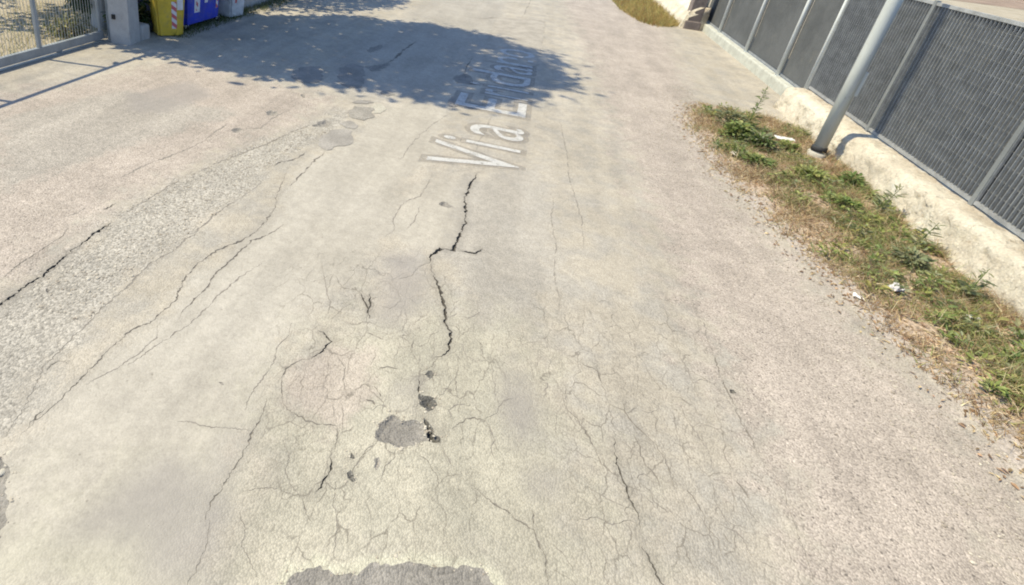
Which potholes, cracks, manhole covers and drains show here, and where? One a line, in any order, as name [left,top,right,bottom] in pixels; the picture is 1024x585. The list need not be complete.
pothole [424,418,441,443]
pothole [375,415,427,448]
crack [361,173,512,461]
pothole [418,394,437,412]
crack [565,300,816,585]
crack [21,153,323,434]
